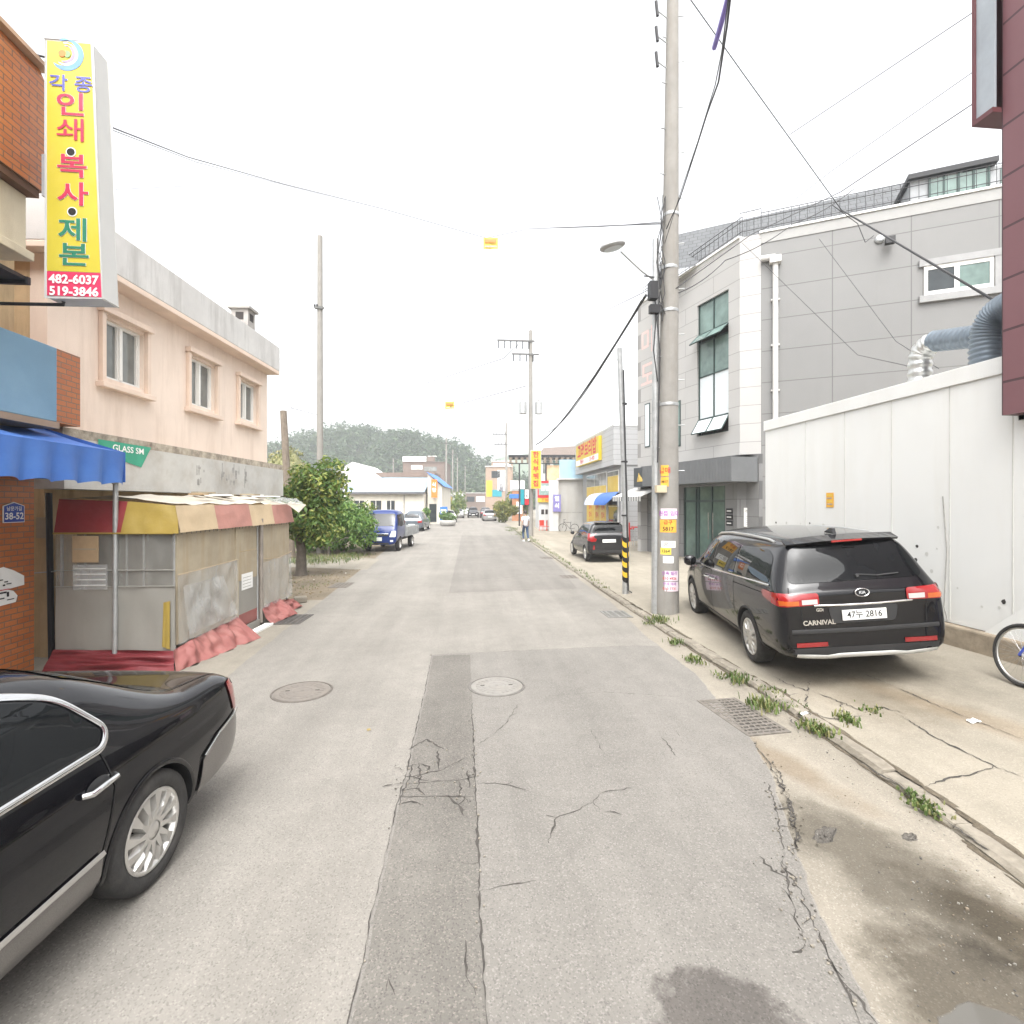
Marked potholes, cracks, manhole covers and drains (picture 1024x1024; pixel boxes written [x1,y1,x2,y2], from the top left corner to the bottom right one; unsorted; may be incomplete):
crack [347,654,536,1024]
manhole cover [270,681,333,703]
drain grate [273,614,314,625]
manhole cover [468,676,525,697]
crack [907,719,1020,776]
crack [547,787,627,843]
pothole [812,826,837,843]
crack [753,741,877,1024]
drain grate [697,697,791,737]
drain grate [600,610,633,618]
